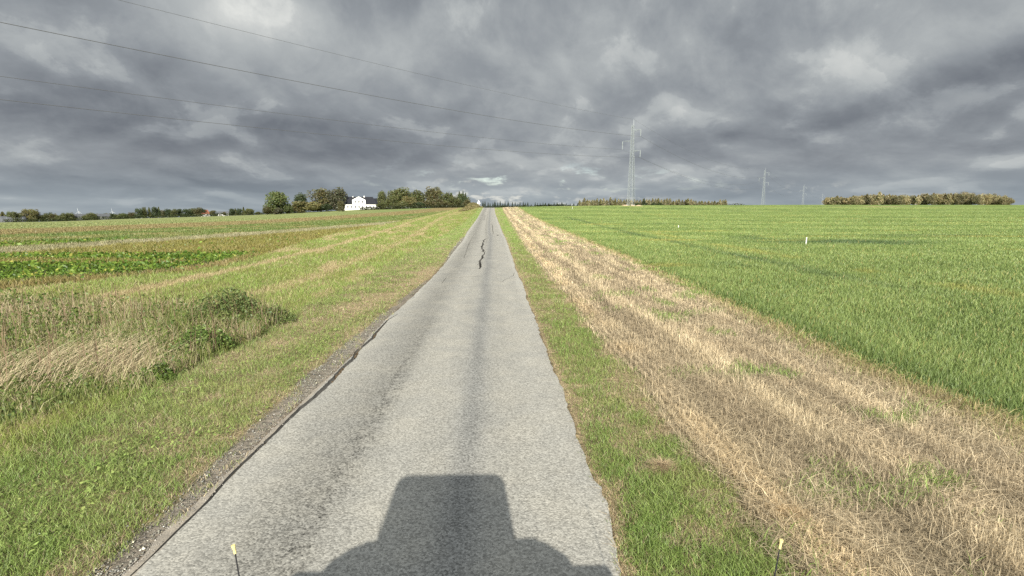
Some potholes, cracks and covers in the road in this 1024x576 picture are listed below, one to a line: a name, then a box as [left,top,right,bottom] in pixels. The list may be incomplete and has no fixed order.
crack [445,226,493,279]
